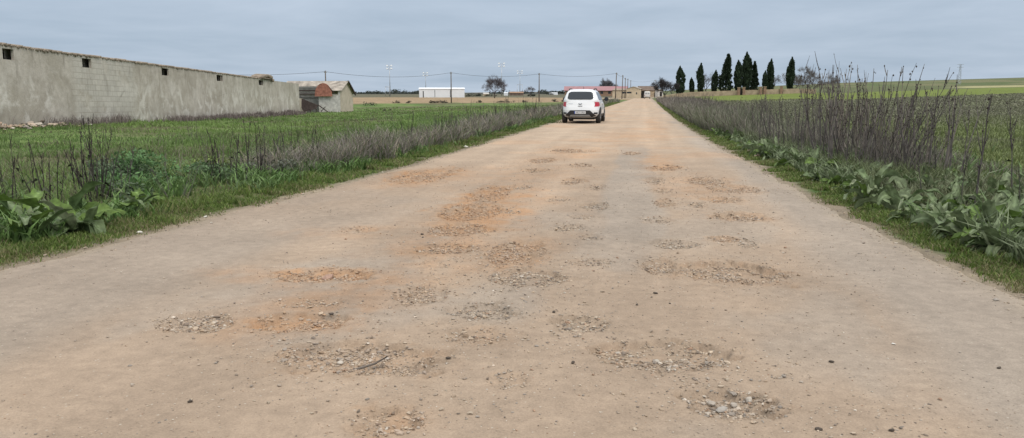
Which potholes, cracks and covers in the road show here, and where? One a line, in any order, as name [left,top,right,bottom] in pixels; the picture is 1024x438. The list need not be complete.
pothole [125,328,560,412]
pothole [320,164,478,209]
pothole [199,264,437,298]
pothole [404,294,567,332]
pothole [84,298,295,347]
pothole [255,390,470,438]
pothole [426,182,538,217]
pothole [659,205,808,227]
pothole [390,234,513,271]
pothole [345,196,556,250]
pothole [343,273,507,322]
pothole [625,367,857,434]
